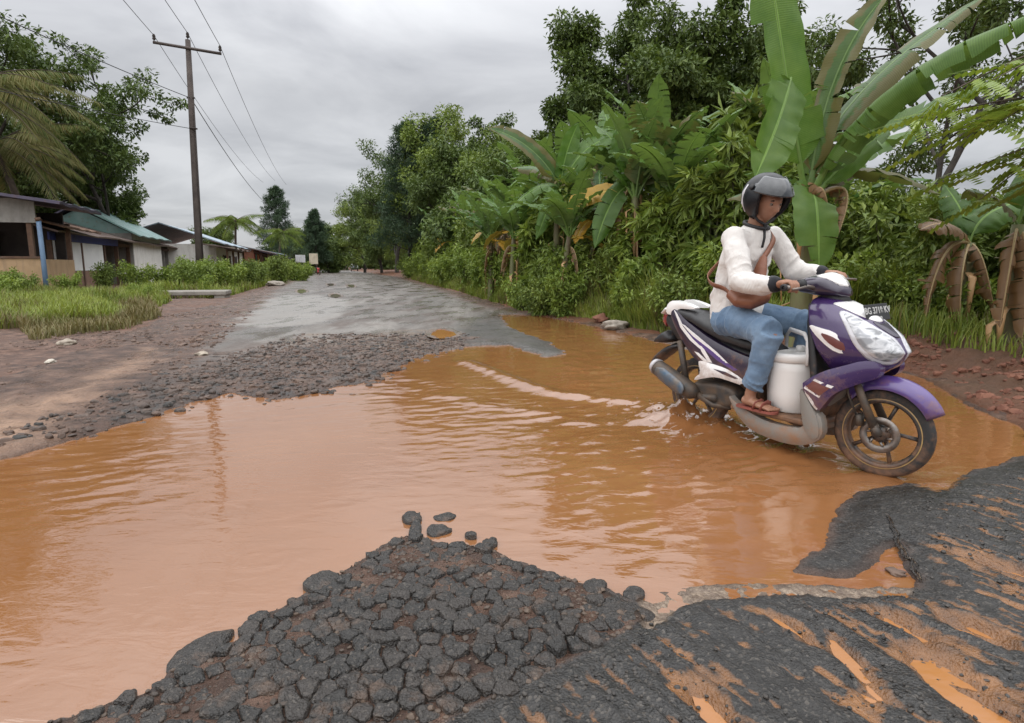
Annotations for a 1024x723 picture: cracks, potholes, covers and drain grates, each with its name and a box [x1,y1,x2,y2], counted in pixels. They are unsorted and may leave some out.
crack [47,512,645,723]
pothole [0,315,1024,723]
crack [886,514,923,582]
